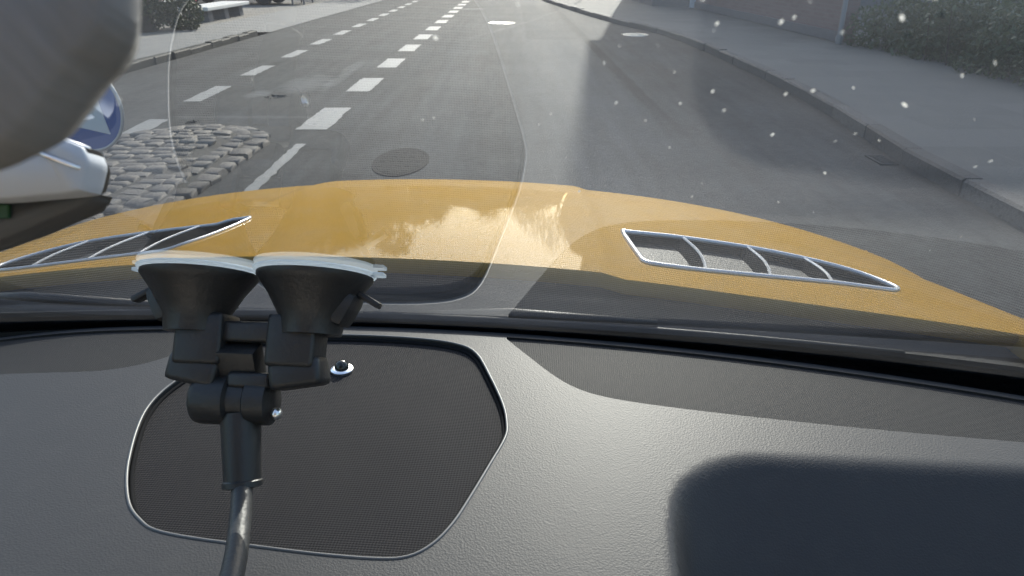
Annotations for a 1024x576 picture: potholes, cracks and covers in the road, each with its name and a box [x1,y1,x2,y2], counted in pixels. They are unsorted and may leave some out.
drain grate [865,155,899,165]
manhole cover [372,148,429,177]
